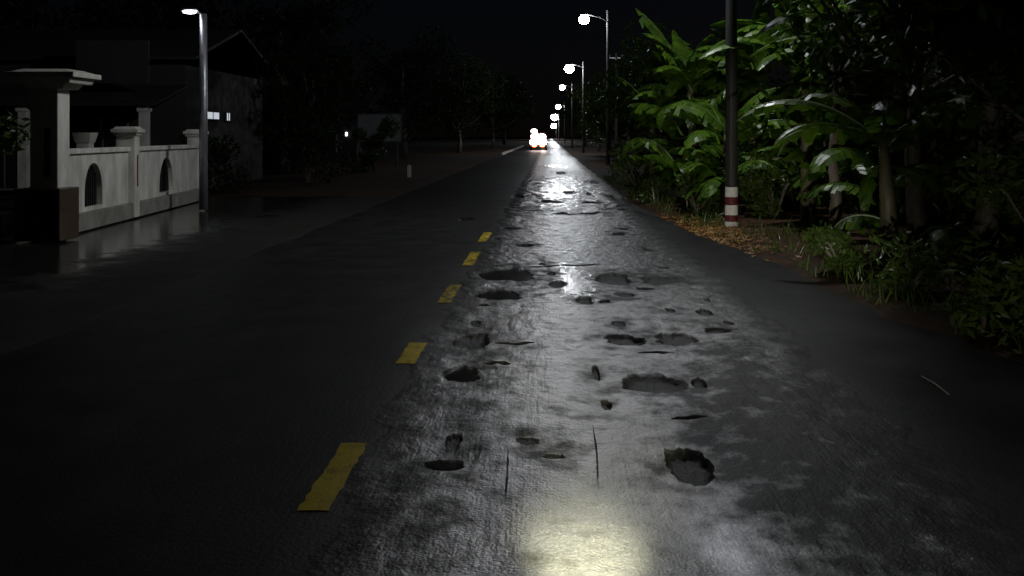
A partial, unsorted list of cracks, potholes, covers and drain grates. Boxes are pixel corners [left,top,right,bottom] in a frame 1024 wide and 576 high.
pothole [452,332,490,350]
pothole [664,447,715,487]
pothole [575,296,594,305]
pothole [422,459,464,471]
pothole [654,332,700,346]
pothole [690,377,708,389]
pothole [444,433,463,453]
pothole [603,334,648,346]
pothole [468,289,522,300]
pothole [473,267,535,282]
pothole [591,365,601,381]
pothole [593,272,633,286]
